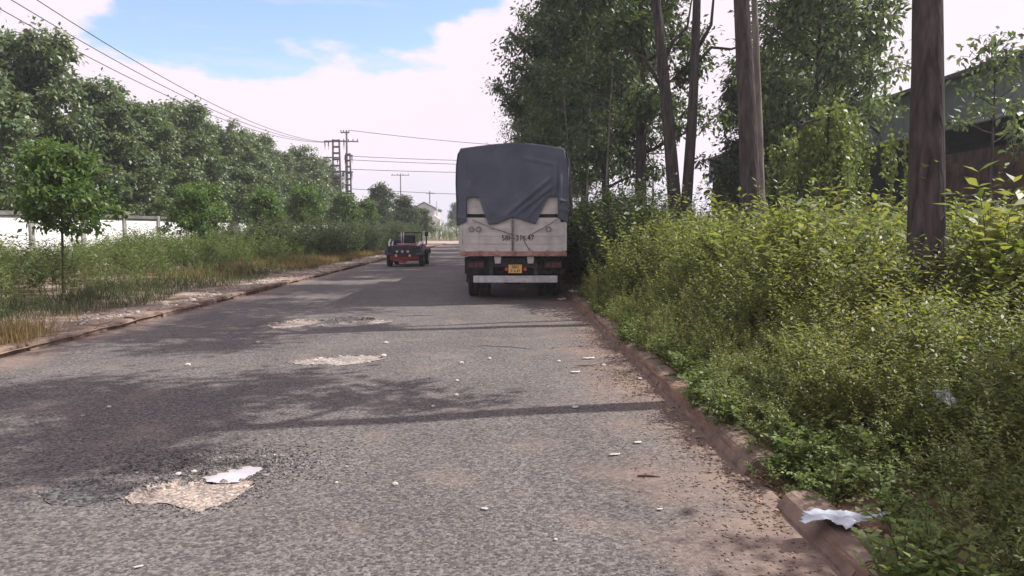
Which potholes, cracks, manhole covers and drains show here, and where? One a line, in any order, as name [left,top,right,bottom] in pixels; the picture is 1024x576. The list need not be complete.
pothole [31,480,138,507]
pothole [119,466,263,512]
pothole [267,319,321,329]
pothole [318,320,393,328]
pothole [289,355,386,365]
